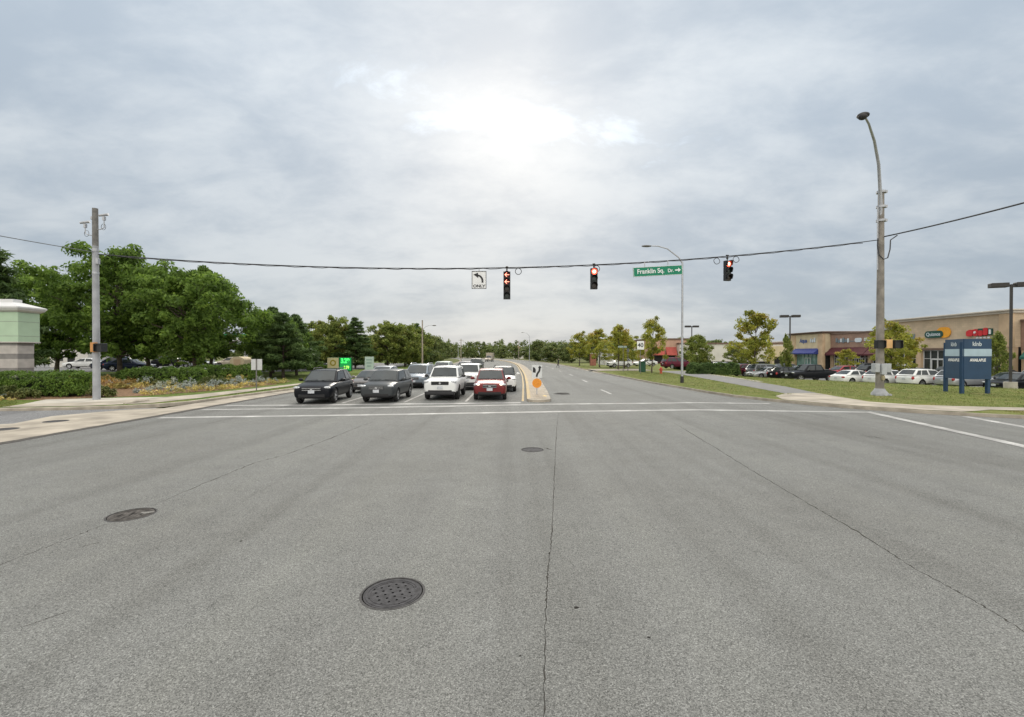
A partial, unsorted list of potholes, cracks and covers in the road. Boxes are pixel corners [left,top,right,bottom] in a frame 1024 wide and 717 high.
crack [681,427,1024,632]
crack [543,412,559,717]
manhole cover [359,577,425,611]
crack [156,422,372,504]
manhole cover [104,507,158,522]
